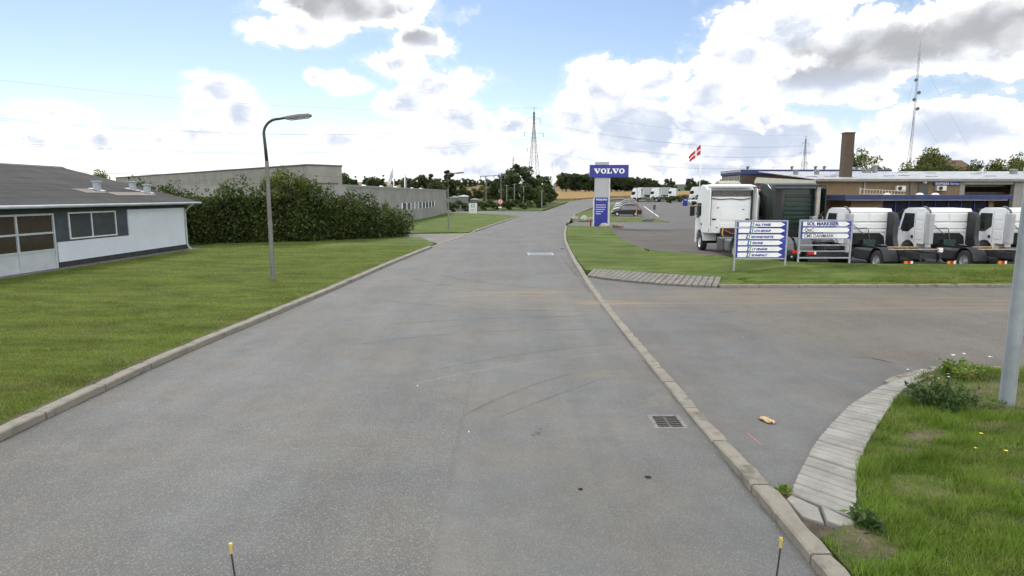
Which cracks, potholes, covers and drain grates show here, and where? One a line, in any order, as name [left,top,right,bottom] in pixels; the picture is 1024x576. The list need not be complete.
drain grate [647,415,688,428]
